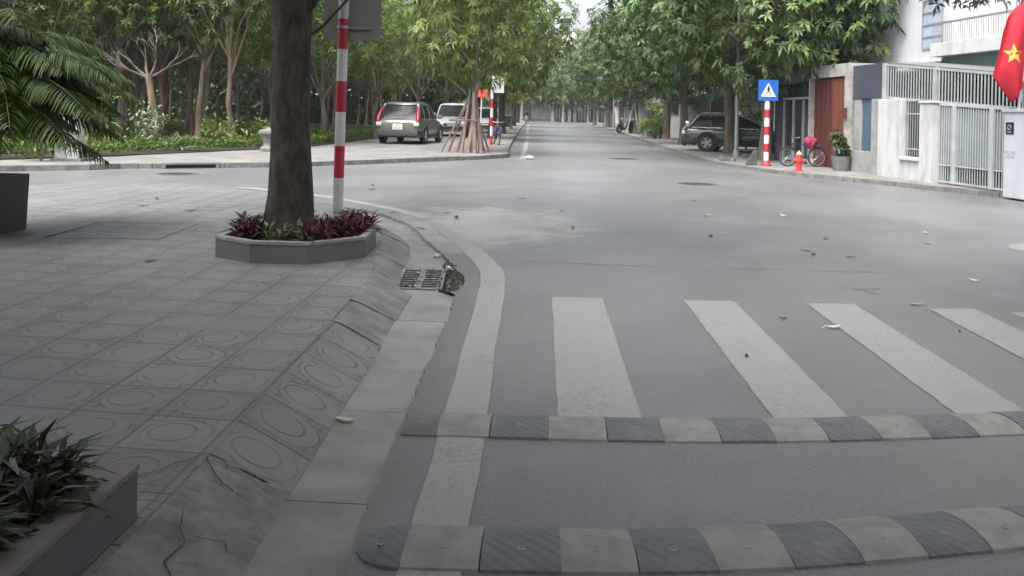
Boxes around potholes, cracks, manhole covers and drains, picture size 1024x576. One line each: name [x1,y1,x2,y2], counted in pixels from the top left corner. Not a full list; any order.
drain grate [399,267,448,291]
crack [138,455,276,498]
crack [163,509,231,576]
